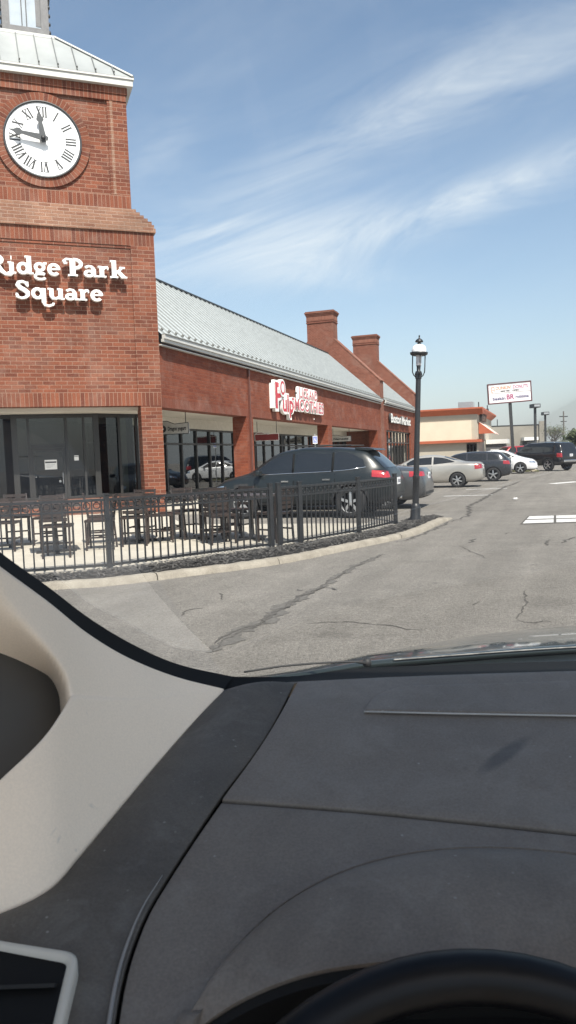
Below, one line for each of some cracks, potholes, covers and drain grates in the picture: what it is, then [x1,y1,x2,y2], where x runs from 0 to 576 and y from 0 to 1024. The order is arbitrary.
crack [516,589,551,623]
crack [182,554,424,652]
